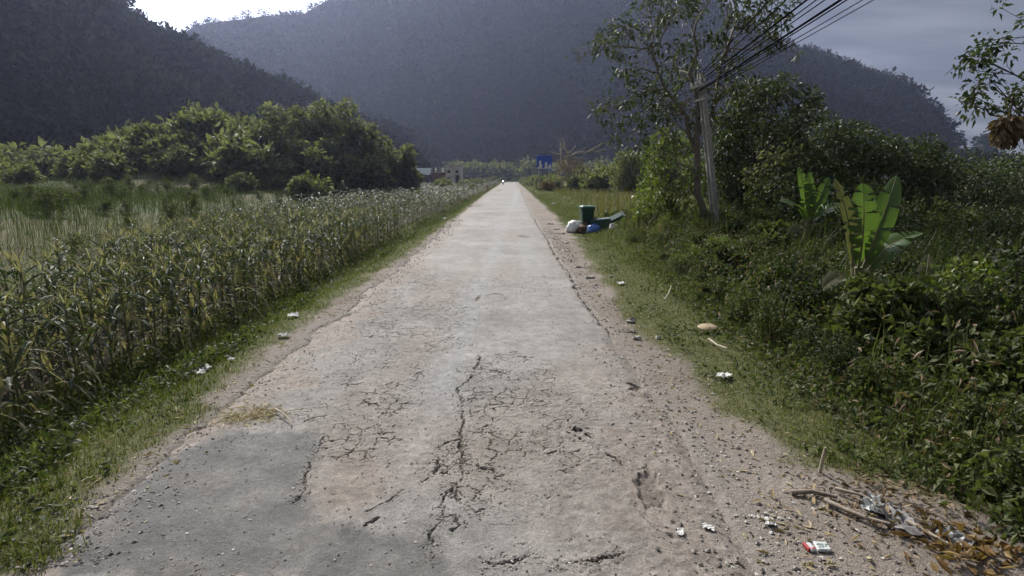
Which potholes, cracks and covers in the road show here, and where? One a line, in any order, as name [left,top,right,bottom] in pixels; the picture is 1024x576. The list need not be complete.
crack [281,267,640,573]
pothole [621,453,679,533]
